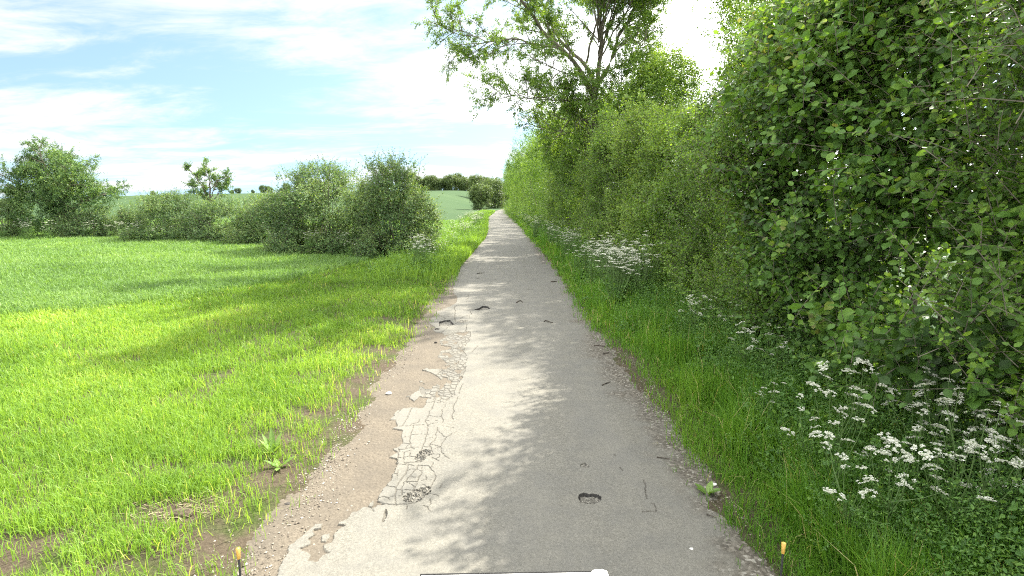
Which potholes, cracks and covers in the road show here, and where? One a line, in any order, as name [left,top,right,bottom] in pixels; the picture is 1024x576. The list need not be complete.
crack [642,479,657,512]
pothole [402,486,432,502]
pothole [414,449,432,462]
pothole [578,493,602,504]
crack [372,295,484,522]
